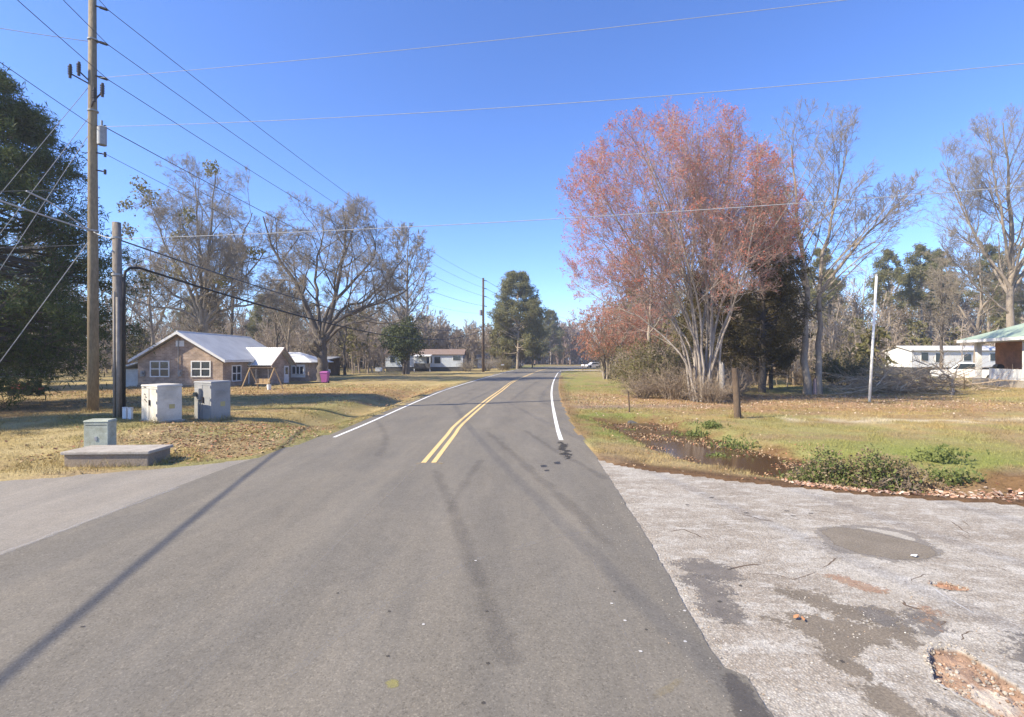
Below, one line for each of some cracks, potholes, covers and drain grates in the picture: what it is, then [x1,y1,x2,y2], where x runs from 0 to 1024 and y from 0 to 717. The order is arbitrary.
crack [732,558,836,580]
pothole [922,642,1024,717]
crack [902,601,969,640]
